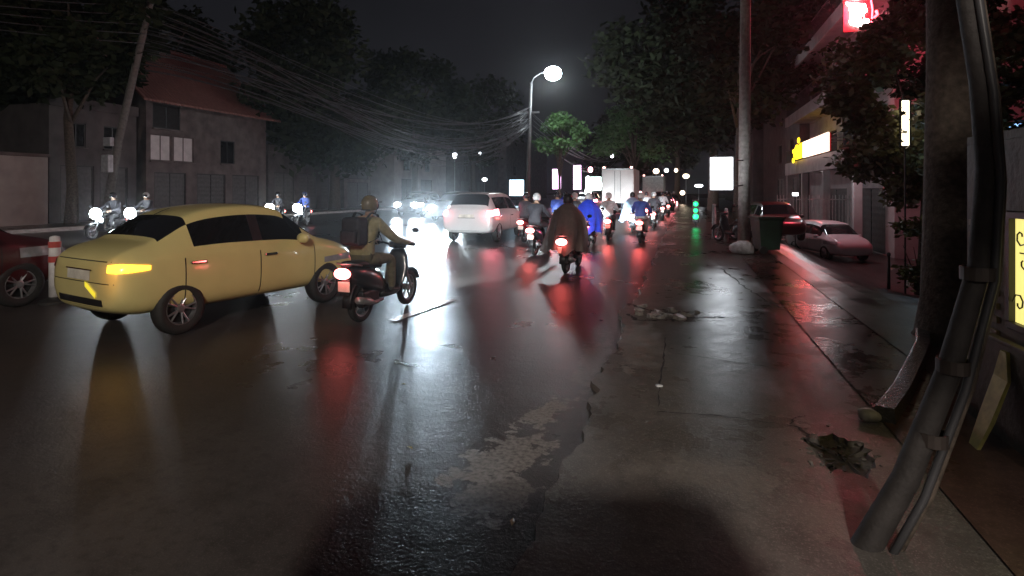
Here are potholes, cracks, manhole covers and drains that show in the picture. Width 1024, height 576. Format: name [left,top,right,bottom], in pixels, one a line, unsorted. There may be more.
crack [658,343,830,451]
crack [721,268,781,308]
pothole [799,425,883,487]
